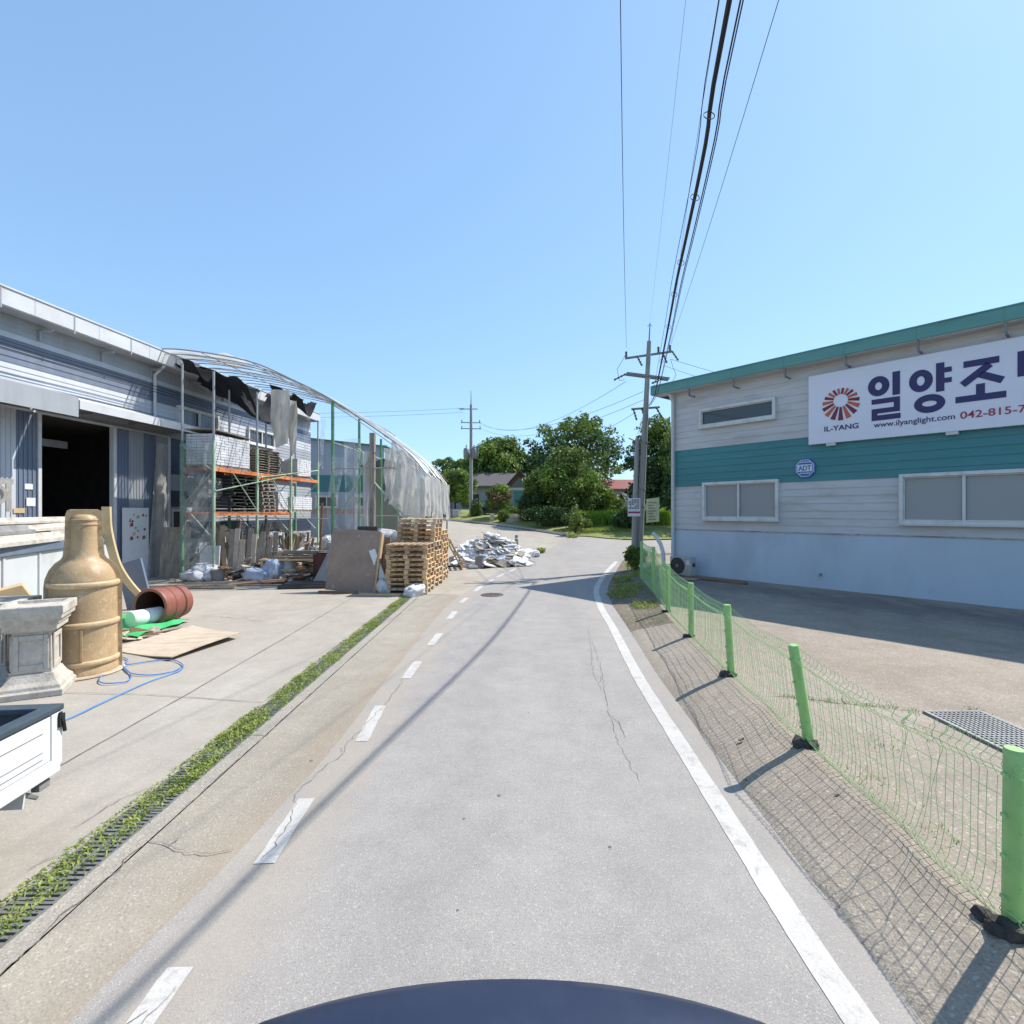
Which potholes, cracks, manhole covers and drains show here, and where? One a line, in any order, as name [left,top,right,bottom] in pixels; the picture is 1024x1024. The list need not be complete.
drain grate [0,906,51,949]
drain grate [290,665,333,687]
drain grate [127,754,227,812]
crack [146,837,233,854]
drain grate [923,710,1024,752]
crack [588,635,639,780]
drain grate [252,686,308,715]
drain grate [7,811,162,906]
crack [263,679,402,857]
drain grate [203,715,274,754]
